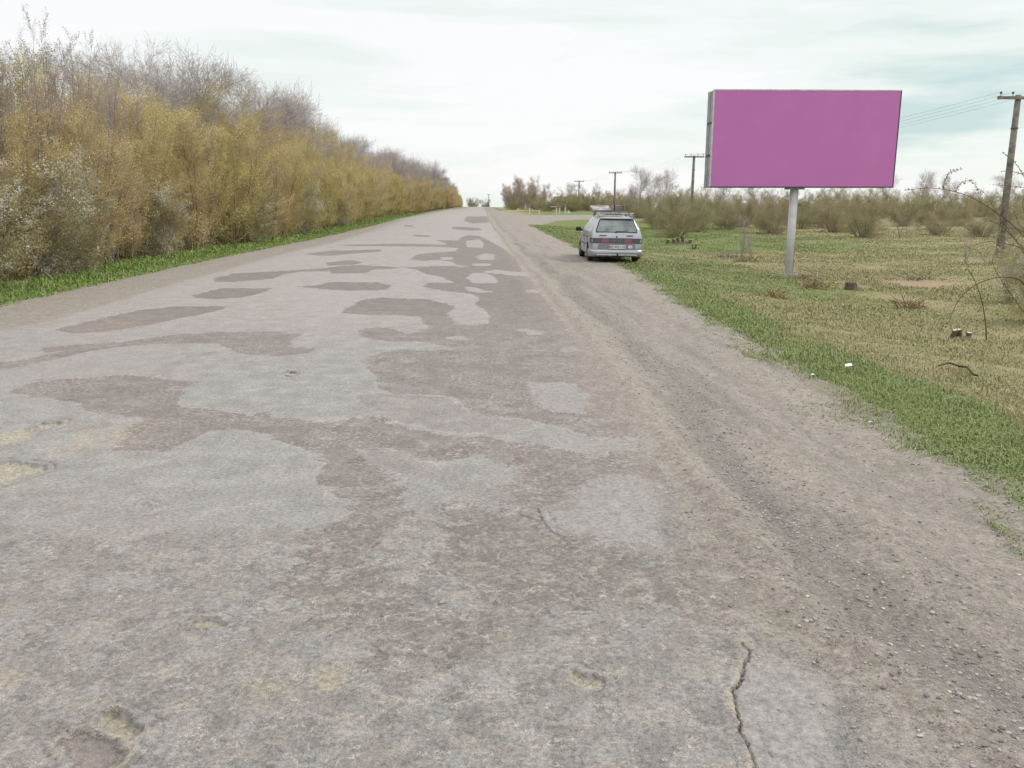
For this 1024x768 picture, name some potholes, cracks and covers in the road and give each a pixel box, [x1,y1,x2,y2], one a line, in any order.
pothole [550,663,618,697]
pothole [0,459,54,488]
crack [510,505,572,540]
pothole [84,702,162,744]
pothole [41,724,146,768]
crack [715,632,774,768]
